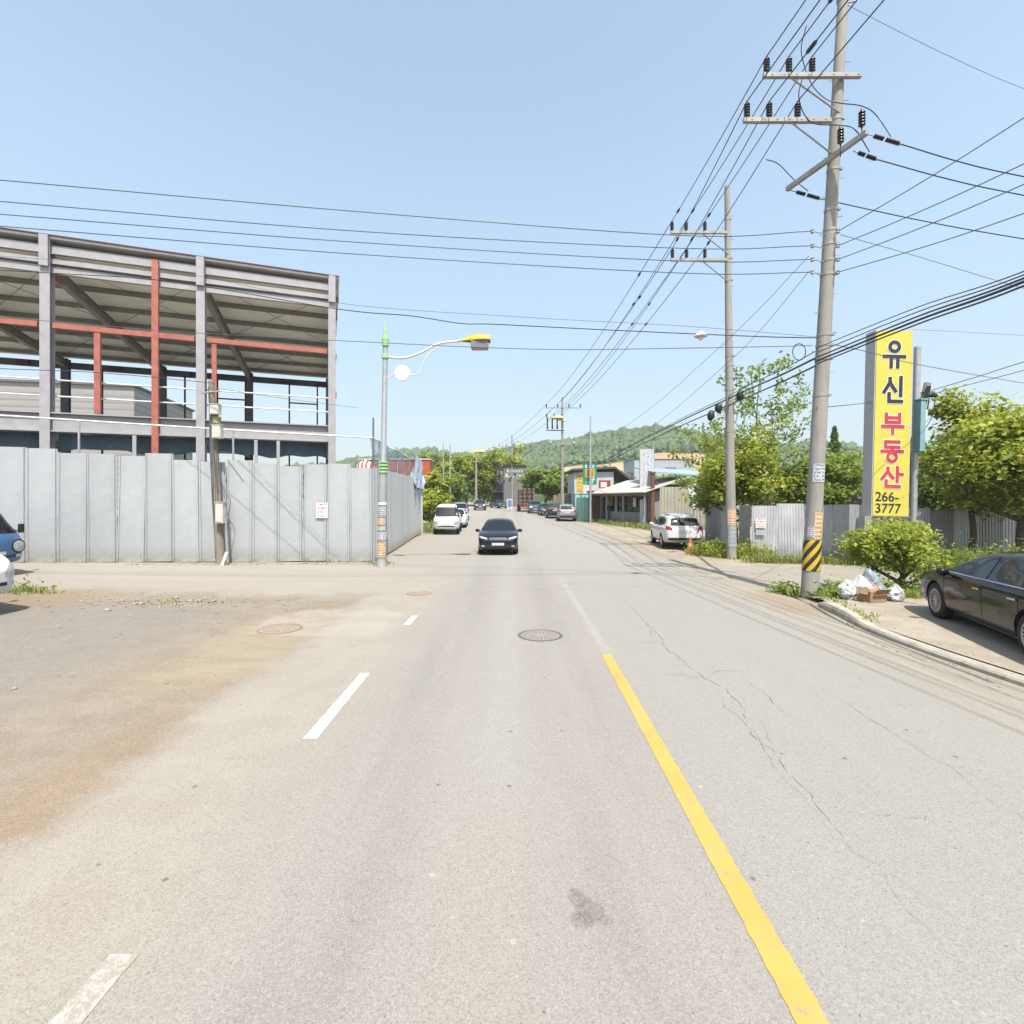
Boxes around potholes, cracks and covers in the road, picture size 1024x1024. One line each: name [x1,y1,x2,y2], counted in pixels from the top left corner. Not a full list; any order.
crack [636,612,1021,994]
manhole cover [256,624,303,635]
manhole cover [518,629,563,641]
